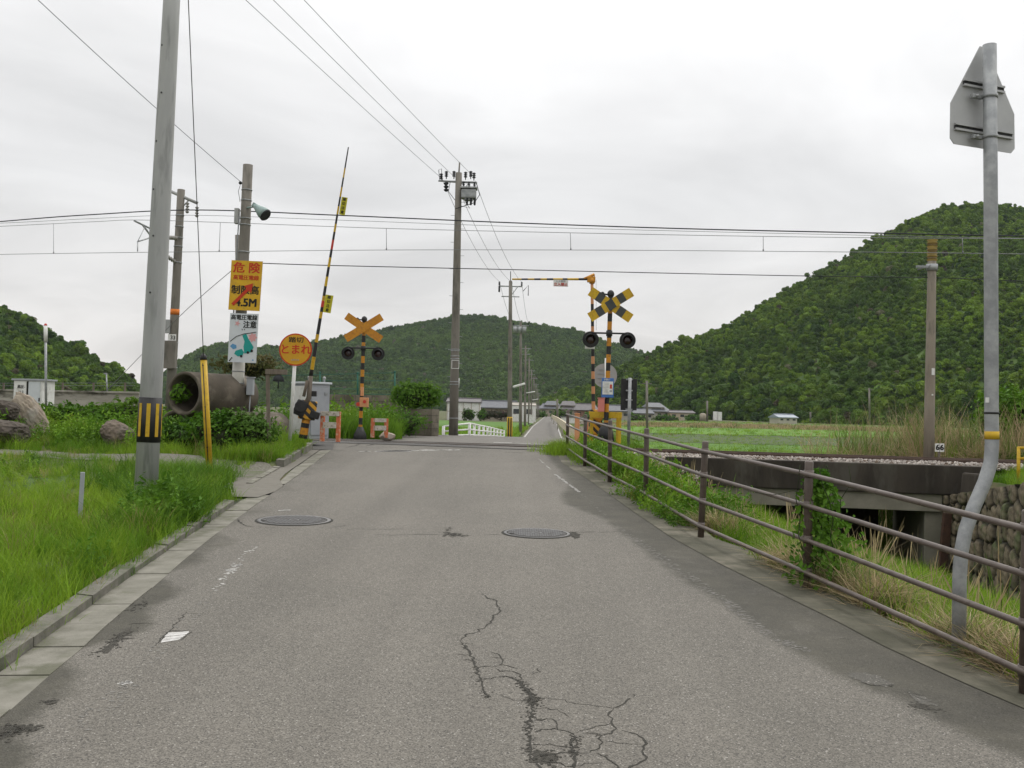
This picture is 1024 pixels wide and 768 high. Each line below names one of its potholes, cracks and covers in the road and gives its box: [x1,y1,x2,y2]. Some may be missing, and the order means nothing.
crack [460,594,648,768]
manhole cover [501,528,572,539]
manhole cover [255,515,333,526]
